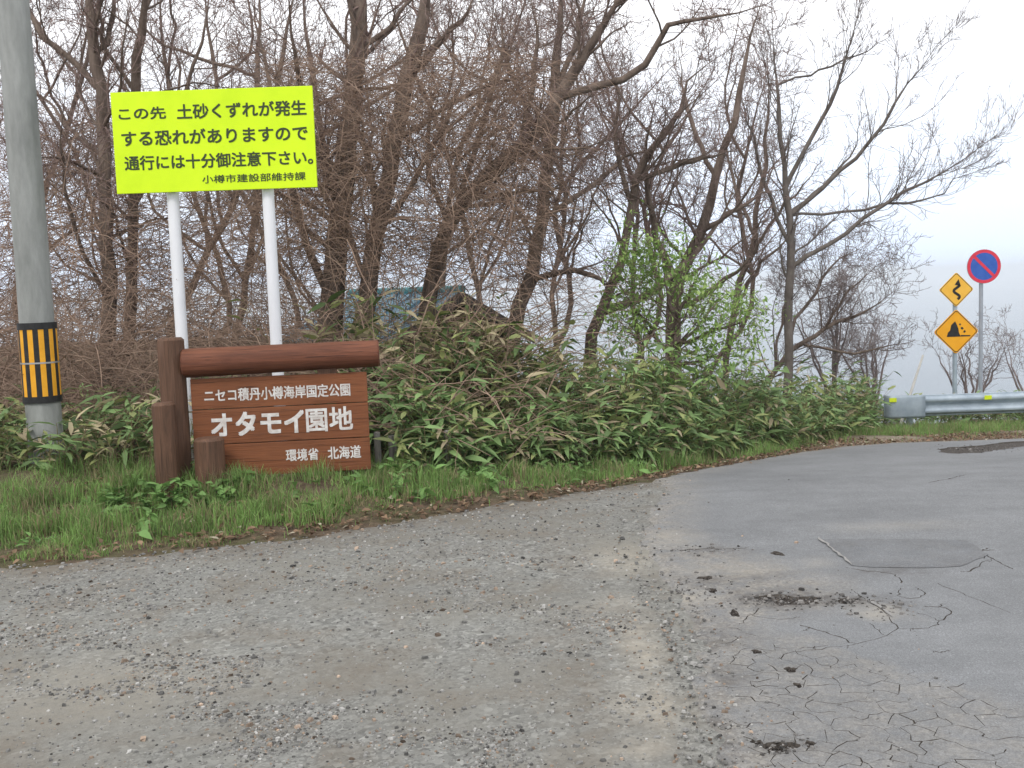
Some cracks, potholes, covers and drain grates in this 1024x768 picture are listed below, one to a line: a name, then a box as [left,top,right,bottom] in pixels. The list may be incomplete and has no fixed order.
pothole [759,742,800,754]
crack [696,628,1024,768]
crack [739,548,1013,652]
pothole [753,594,820,606]
